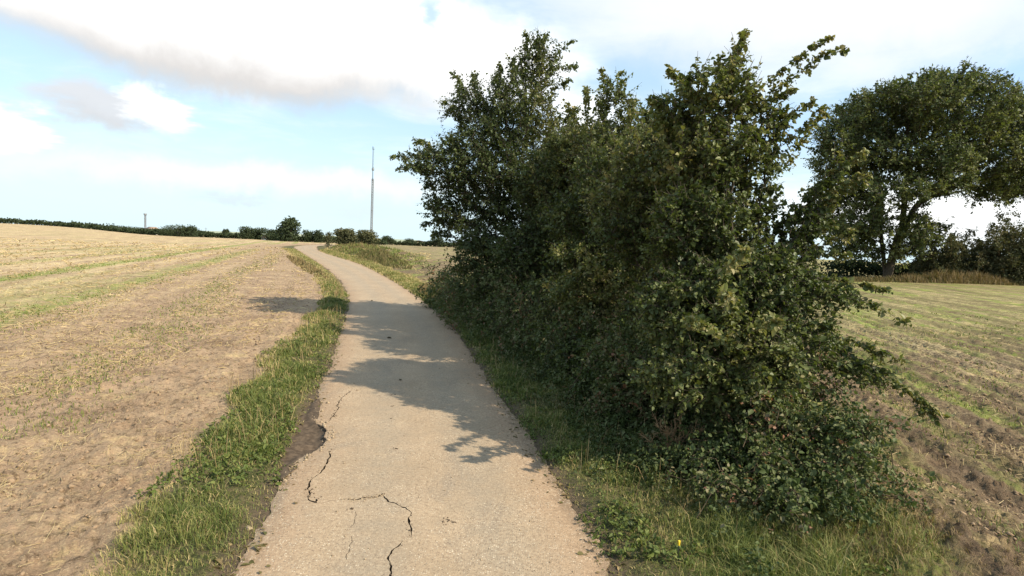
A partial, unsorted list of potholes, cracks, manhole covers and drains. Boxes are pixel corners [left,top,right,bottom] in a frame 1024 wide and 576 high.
crack [307,453,412,576]
